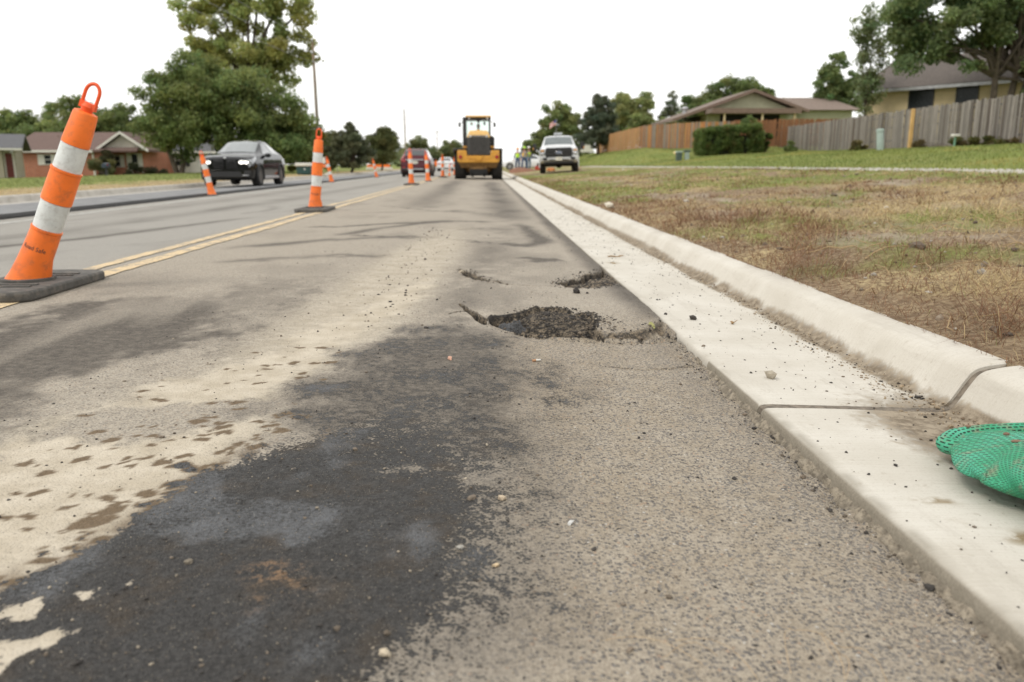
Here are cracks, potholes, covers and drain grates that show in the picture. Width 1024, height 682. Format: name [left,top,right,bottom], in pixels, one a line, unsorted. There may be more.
pothole [557,268,618,288]
pothole [487,307,677,344]
